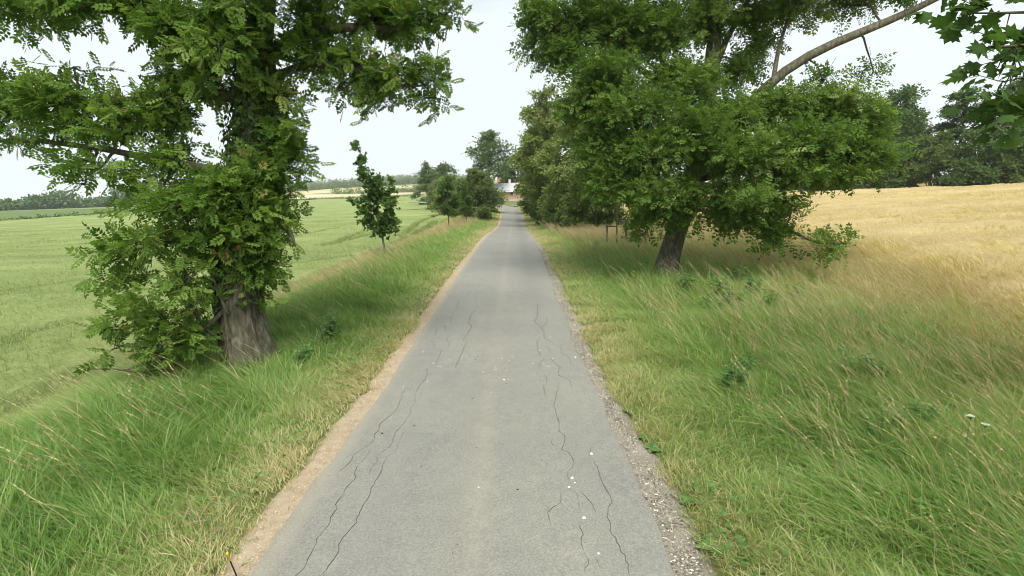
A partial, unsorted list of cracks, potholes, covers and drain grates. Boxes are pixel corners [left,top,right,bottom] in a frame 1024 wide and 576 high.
crack [298,301,477,574]
crack [528,305,629,575]
